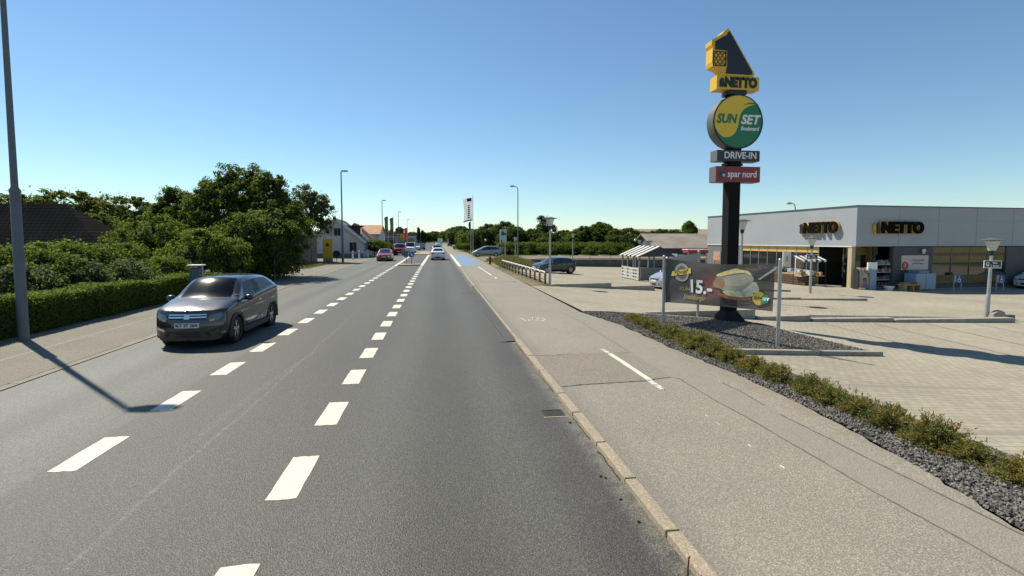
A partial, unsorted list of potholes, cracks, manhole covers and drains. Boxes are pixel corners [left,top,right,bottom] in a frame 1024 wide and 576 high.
drain grate [541,409,566,418]
